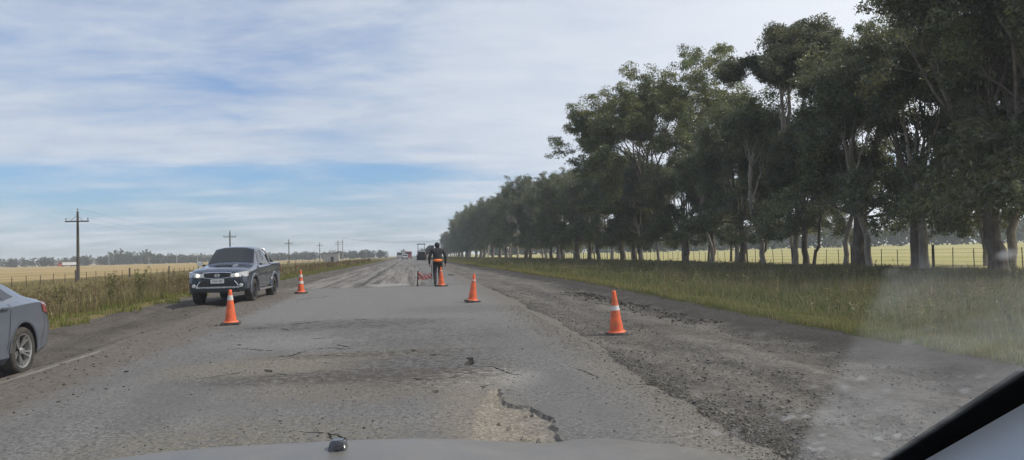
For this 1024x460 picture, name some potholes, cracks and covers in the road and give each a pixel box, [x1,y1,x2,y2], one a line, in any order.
pothole [470,388,563,443]
